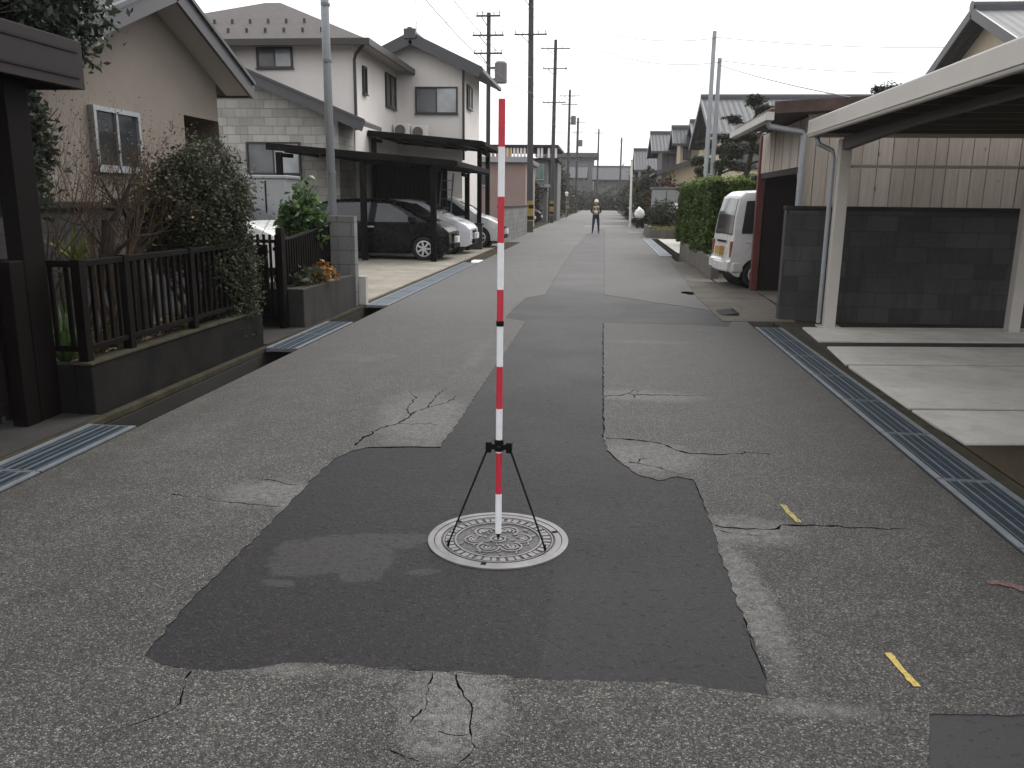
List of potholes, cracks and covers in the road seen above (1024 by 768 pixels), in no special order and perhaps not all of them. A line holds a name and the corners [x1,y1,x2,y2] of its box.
crack [90,671,192,742]
drain grate [936,479,1024,551]
drain grate [0,424,136,473]
drain grate [755,327,799,340]
crack [407,673,482,768]
drain grate [788,355,848,376]
crack [715,524,915,536]
crack [355,388,454,445]
drain grate [365,297,403,308]
manhole cover [428,512,568,570]
crack [609,438,765,474]
drain grate [266,333,328,352]
